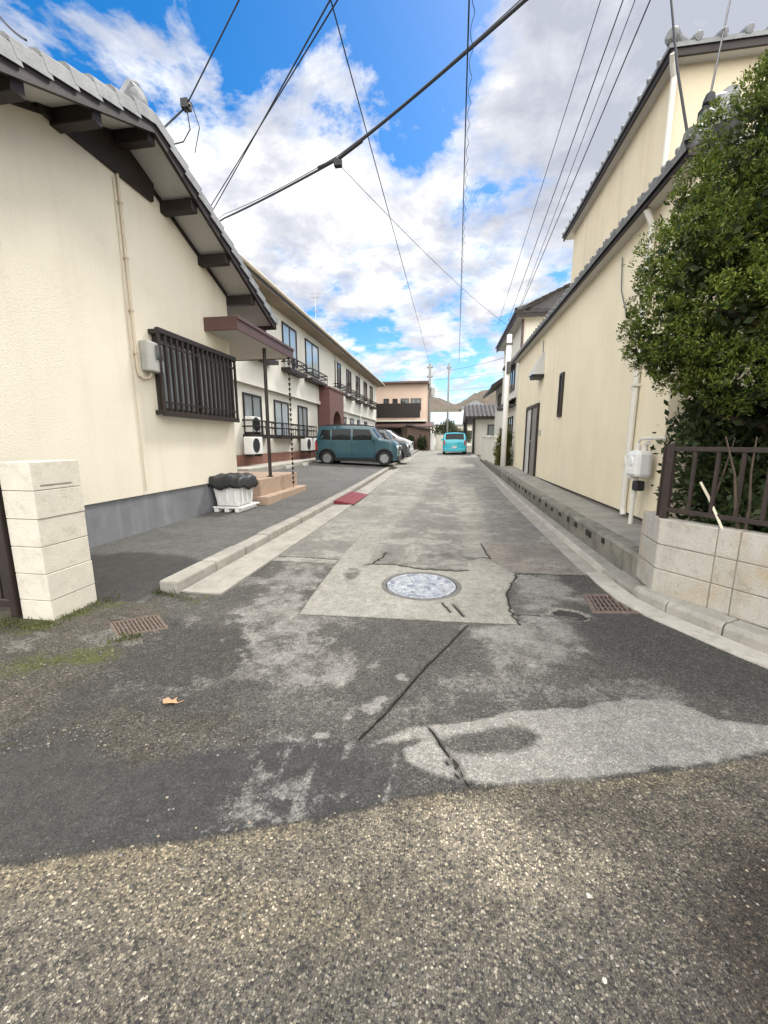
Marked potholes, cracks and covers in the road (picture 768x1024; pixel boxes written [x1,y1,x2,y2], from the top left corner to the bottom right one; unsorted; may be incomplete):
crack [358,603,468,787]
crack [506,574,584,625]
drain grate [109,614,168,636]
manhole cover [382,572,462,601]
pothole [548,610,590,622]
crack [368,544,491,572]
drain grate [582,593,641,614]
